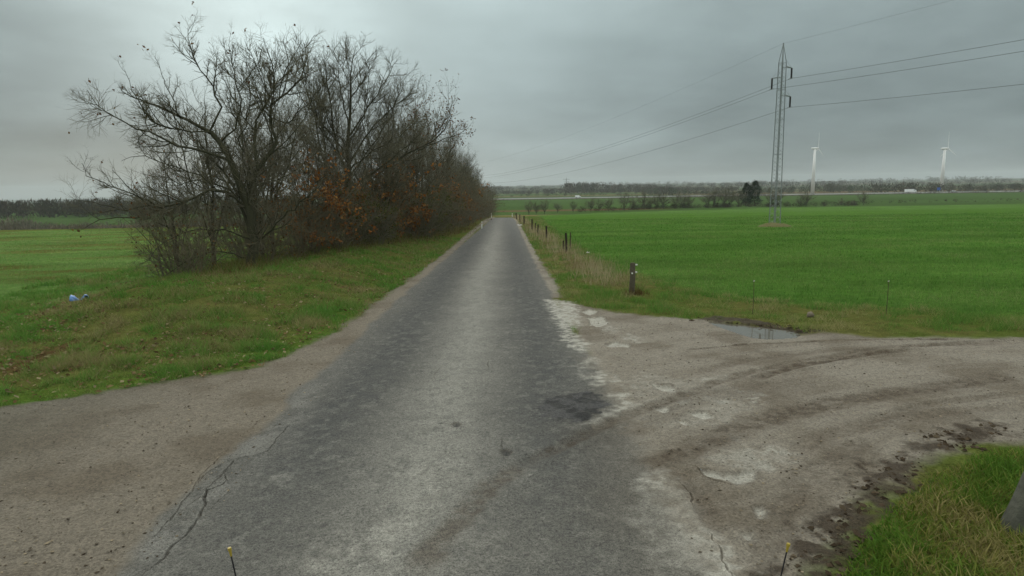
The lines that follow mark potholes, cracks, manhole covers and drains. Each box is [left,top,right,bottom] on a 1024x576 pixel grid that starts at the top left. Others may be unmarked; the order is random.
crack [701,529,745,576]
crack [131,415,304,576]
